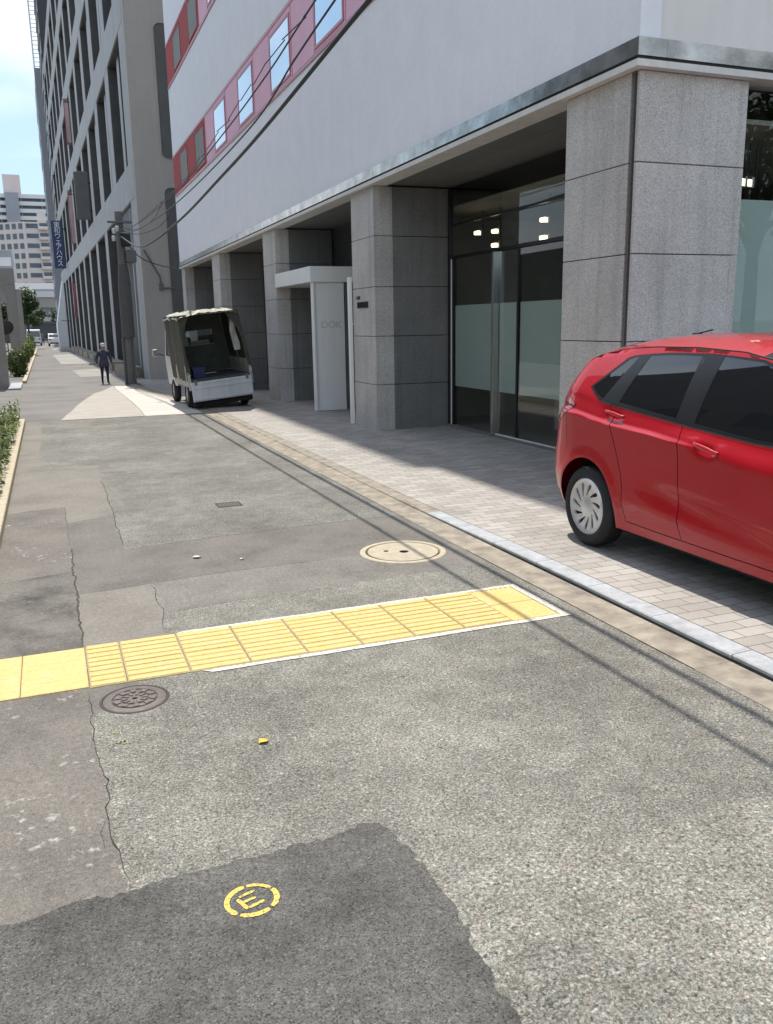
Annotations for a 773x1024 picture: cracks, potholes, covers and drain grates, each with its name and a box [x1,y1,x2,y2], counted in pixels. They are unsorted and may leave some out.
crack [84,561,308,630]
manhole cover [360,541,446,563]
crack [88,692,131,882]
crack [9,481,123,647]
manhole cover [99,685,170,714]
